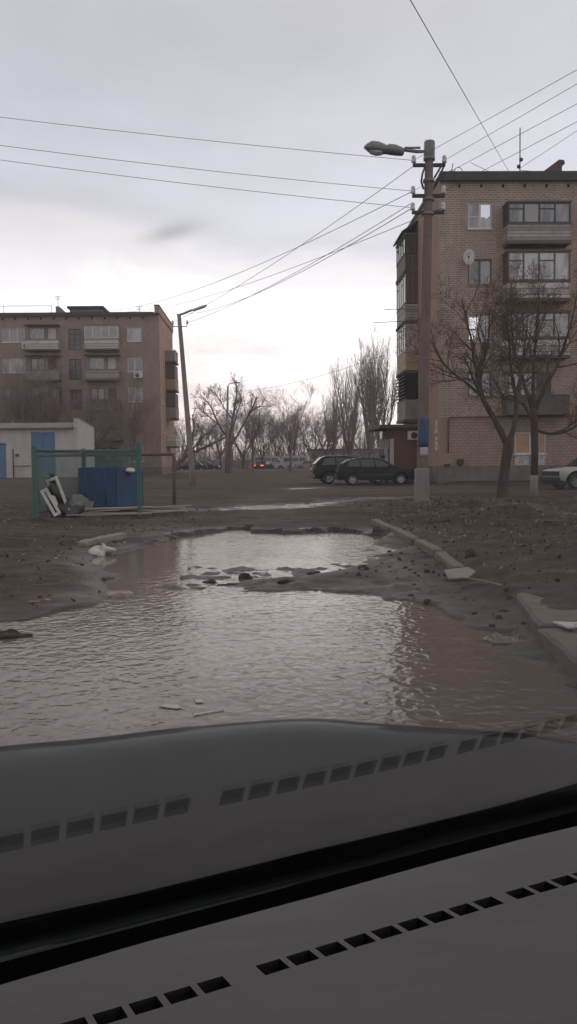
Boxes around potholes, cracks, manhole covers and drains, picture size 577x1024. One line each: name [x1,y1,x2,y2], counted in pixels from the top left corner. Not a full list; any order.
pothole [83,525,411,586]
pothole [0,582,577,746]
